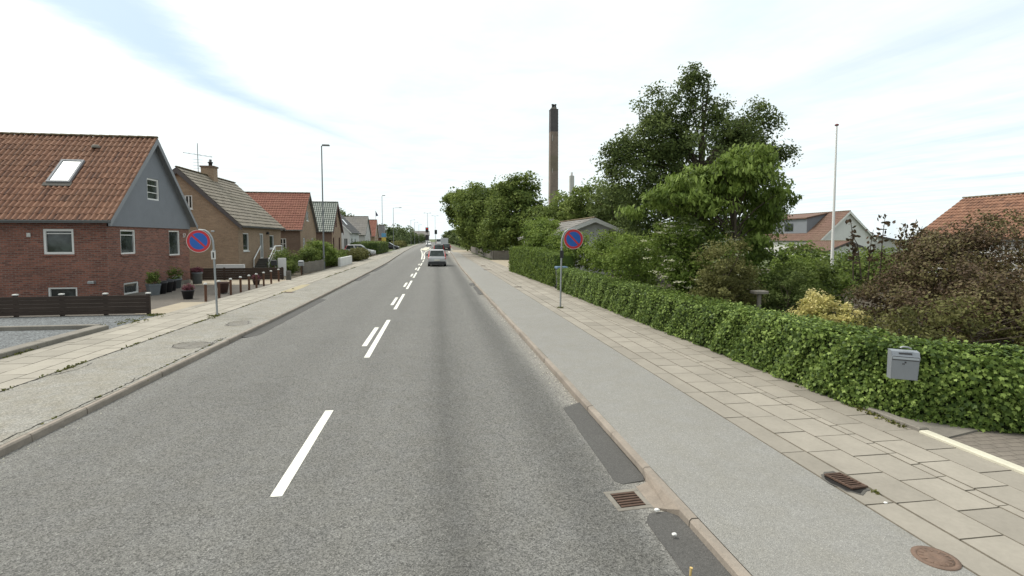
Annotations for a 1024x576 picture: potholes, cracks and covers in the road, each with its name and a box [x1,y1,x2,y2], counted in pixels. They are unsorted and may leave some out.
drain grate [603,488,653,512]
manhole cover [910,546,962,571]
drain grate [821,471,870,495]
